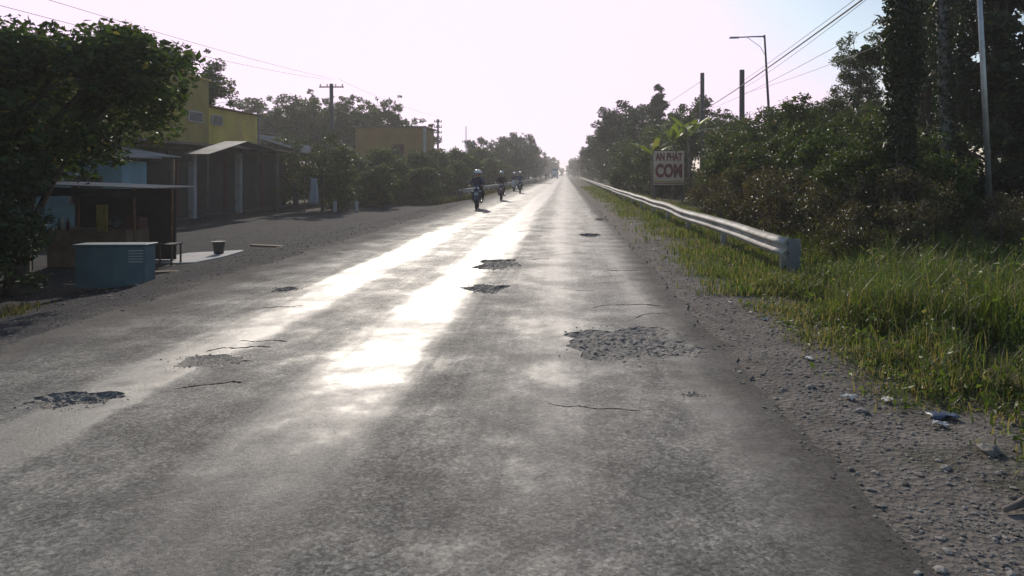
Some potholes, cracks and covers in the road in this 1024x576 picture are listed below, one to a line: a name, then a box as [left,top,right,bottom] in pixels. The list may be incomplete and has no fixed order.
pothole [26,391,125,410]
crack [548,403,639,411]
crack [177,381,242,389]
pothole [472,259,522,270]
pothole [460,284,510,294]
crack [208,340,288,351]
pothole [564,326,709,362]
pothole [173,354,249,369]
